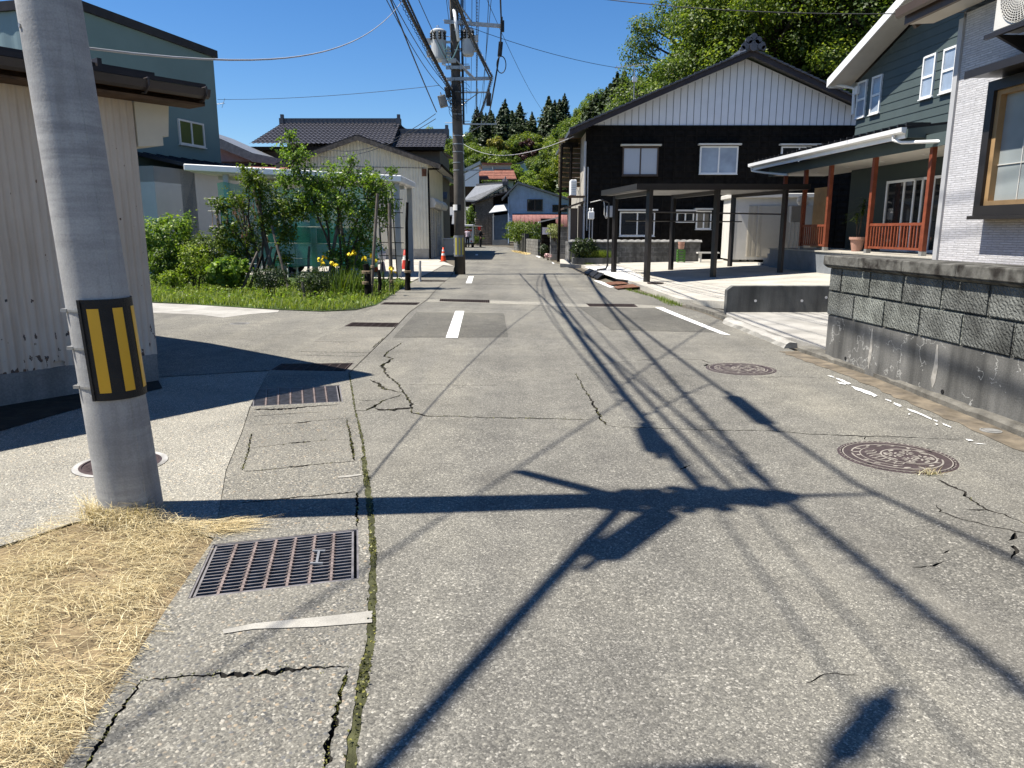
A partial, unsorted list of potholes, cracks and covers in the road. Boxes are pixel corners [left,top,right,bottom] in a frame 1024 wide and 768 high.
manhole cover [706,363,777,375]
drain grate [188,529,359,599]
crack [936,479,1024,559]
drain grate [250,385,343,407]
manhole cover [71,452,168,478]
crack [355,344,957,440]
manhole cover [837,441,959,474]
